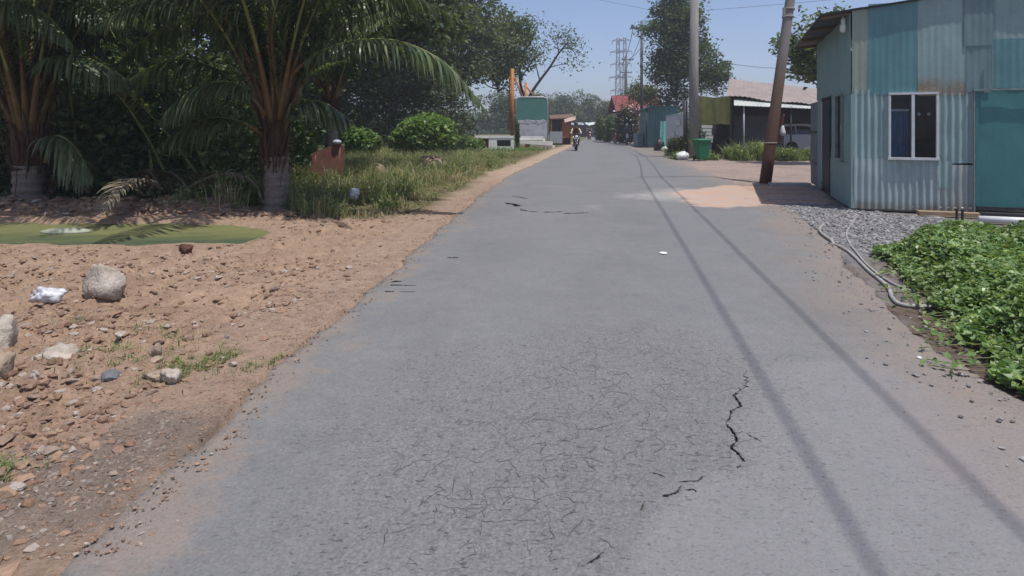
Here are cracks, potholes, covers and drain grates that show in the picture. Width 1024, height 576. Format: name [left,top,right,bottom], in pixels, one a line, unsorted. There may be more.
crack [727,371,760,468]
crack [385,281,416,292]
crack [506,197,583,214]
crack [641,472,702,510]
